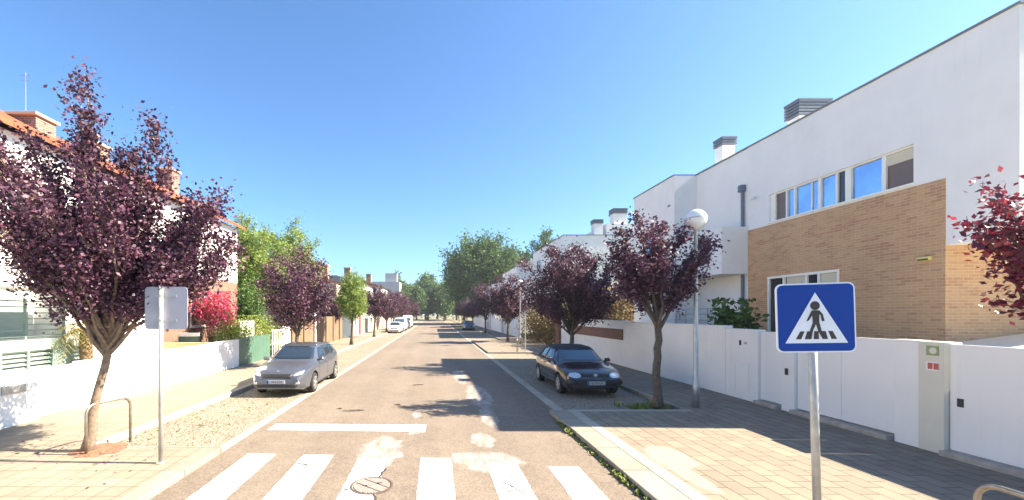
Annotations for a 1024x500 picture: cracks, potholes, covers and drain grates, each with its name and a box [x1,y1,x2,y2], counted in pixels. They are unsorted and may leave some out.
manhole cover [350,477,393,495]
